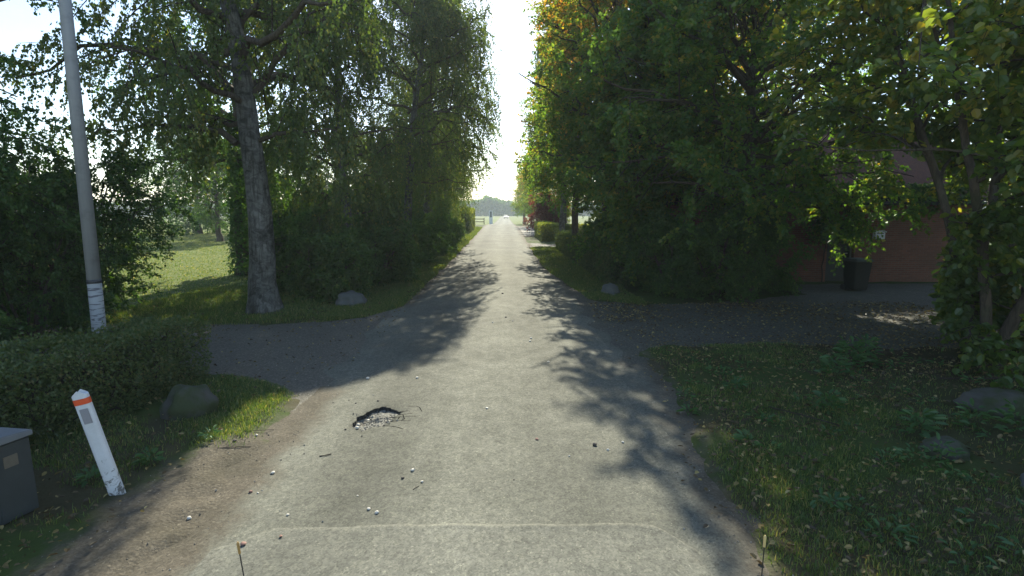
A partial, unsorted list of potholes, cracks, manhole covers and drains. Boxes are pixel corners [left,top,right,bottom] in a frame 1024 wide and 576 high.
pothole [352,407,410,436]
